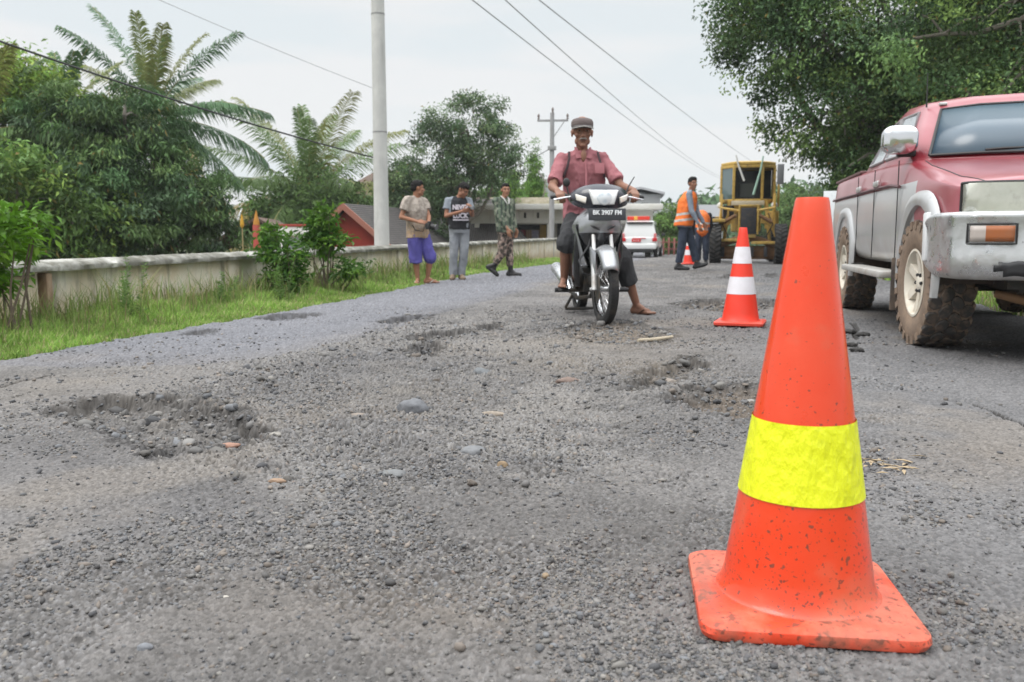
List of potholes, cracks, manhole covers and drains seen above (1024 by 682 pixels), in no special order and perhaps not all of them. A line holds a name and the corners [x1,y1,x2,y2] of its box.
pothole [178,328,219,336]
crack [970,404,1024,427]
pothole [34,392,279,461]
pothole [666,297,776,311]
pothole [618,354,712,391]
pothole [201,312,684,485]
pothole [663,379,759,419]
